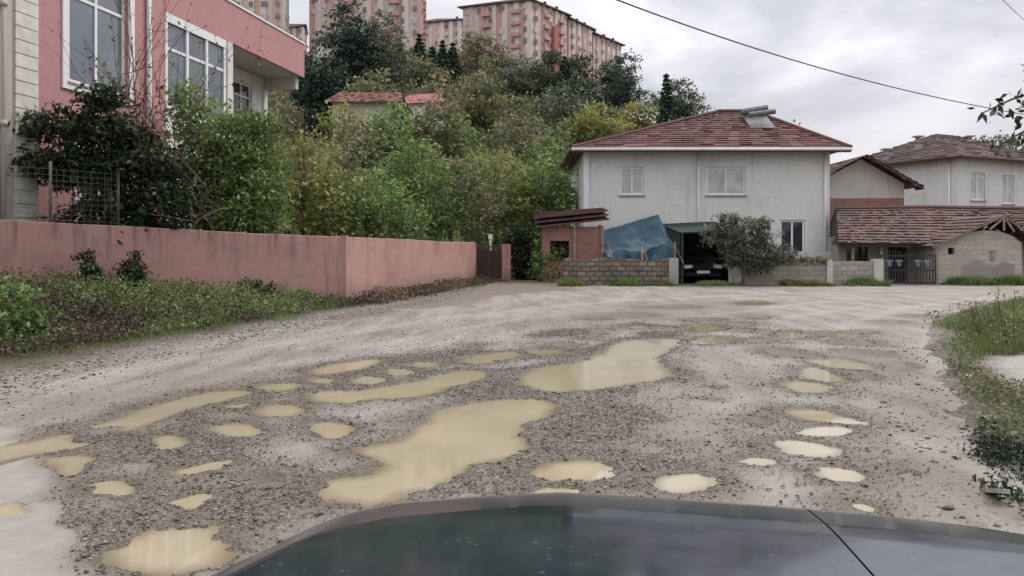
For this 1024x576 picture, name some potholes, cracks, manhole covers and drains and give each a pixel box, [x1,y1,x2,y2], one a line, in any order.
pothole [188,419,282,442]
pothole [753,434,865,461]
pothole [376,366,427,378]
pothole [507,454,643,488]
pothole [289,395,573,512]
pothole [72,515,261,576]
pothole [791,461,891,489]
pothole [0,430,119,470]
pothole [291,368,504,407]
pothole [138,485,241,518]
pothole [720,451,799,471]
pothole [633,466,743,500]
